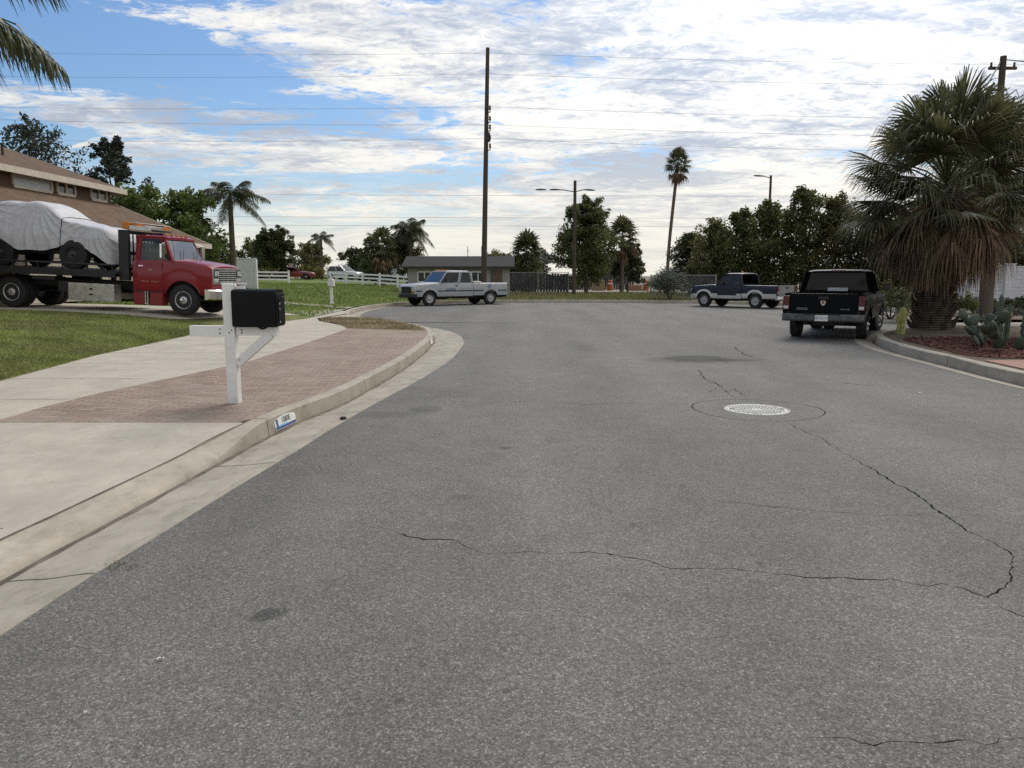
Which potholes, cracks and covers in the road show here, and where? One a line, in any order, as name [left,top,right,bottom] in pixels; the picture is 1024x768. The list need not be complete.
manhole cover [724,404,790,415]
crack [399,426,1024,617]
crack [816,737,1024,746]
